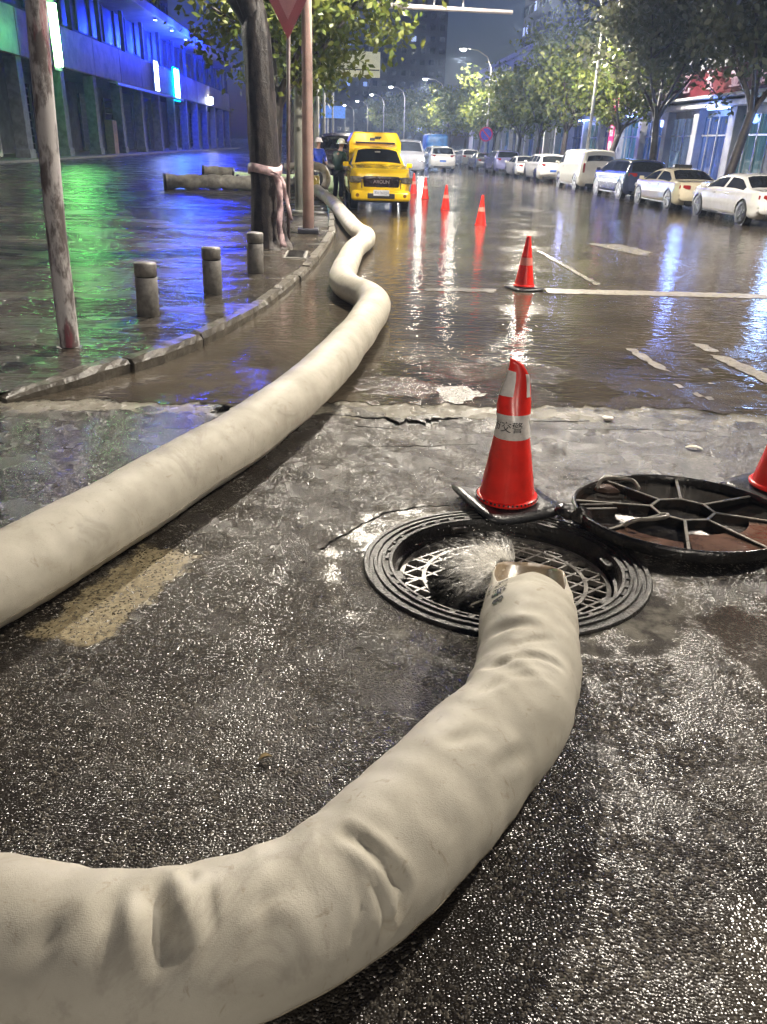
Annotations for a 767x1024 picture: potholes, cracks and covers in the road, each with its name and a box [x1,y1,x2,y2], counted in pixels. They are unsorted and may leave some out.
crack [342,415,458,429]
manhole cover [554,474,767,564]
crack [319,505,452,550]
manhole cover [363,510,653,636]
